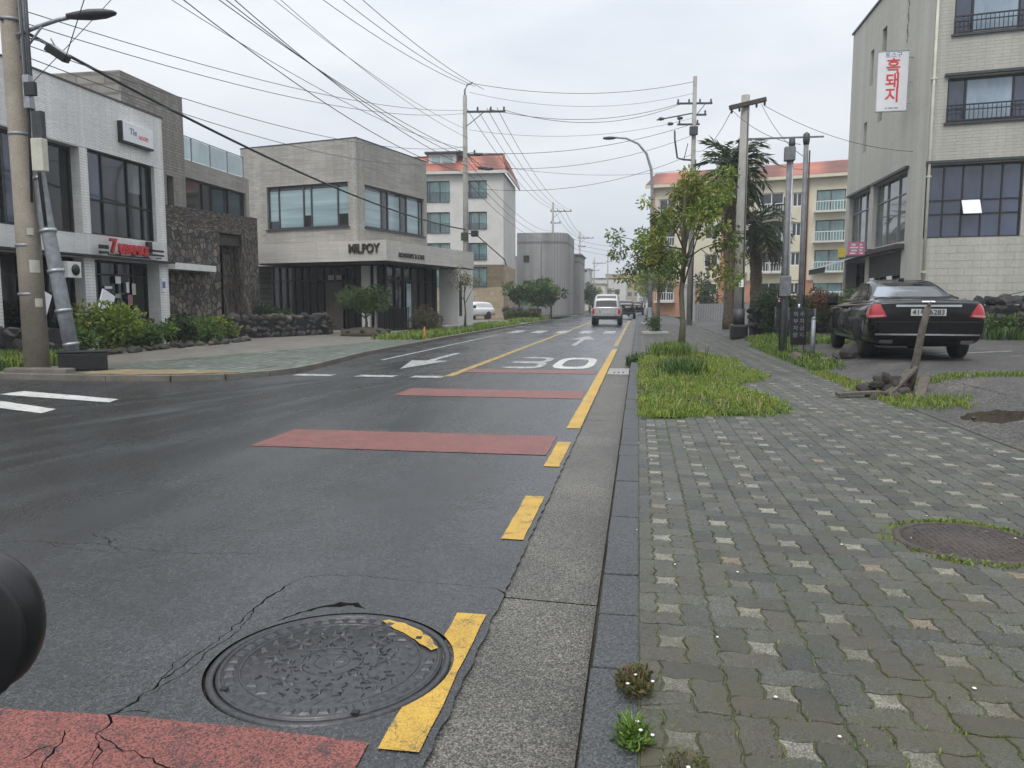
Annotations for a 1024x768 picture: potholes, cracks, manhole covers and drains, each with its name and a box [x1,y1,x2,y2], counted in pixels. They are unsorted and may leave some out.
manhole cover [201,614,451,728]
pothole [960,409,1024,424]
crack [18,730,66,768]
manhole cover [880,517,1024,570]
crack [0,532,261,555]
crack [83,575,508,768]
